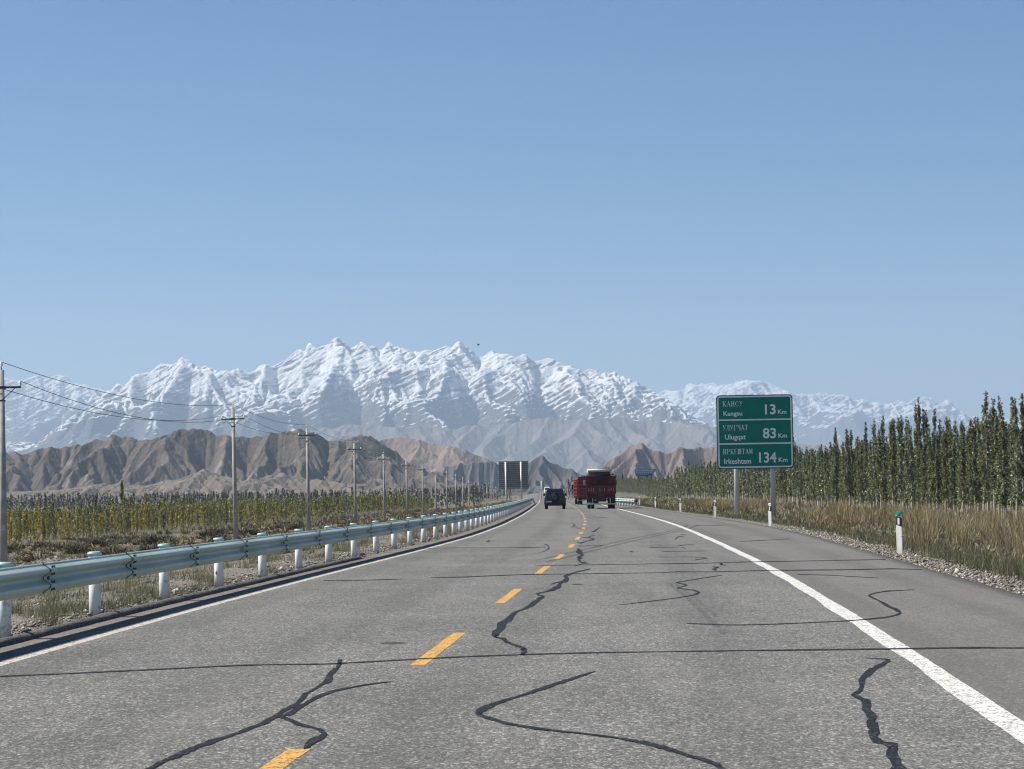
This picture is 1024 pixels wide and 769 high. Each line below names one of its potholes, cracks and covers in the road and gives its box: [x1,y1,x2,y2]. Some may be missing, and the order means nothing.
crack [324,536,922,625]
